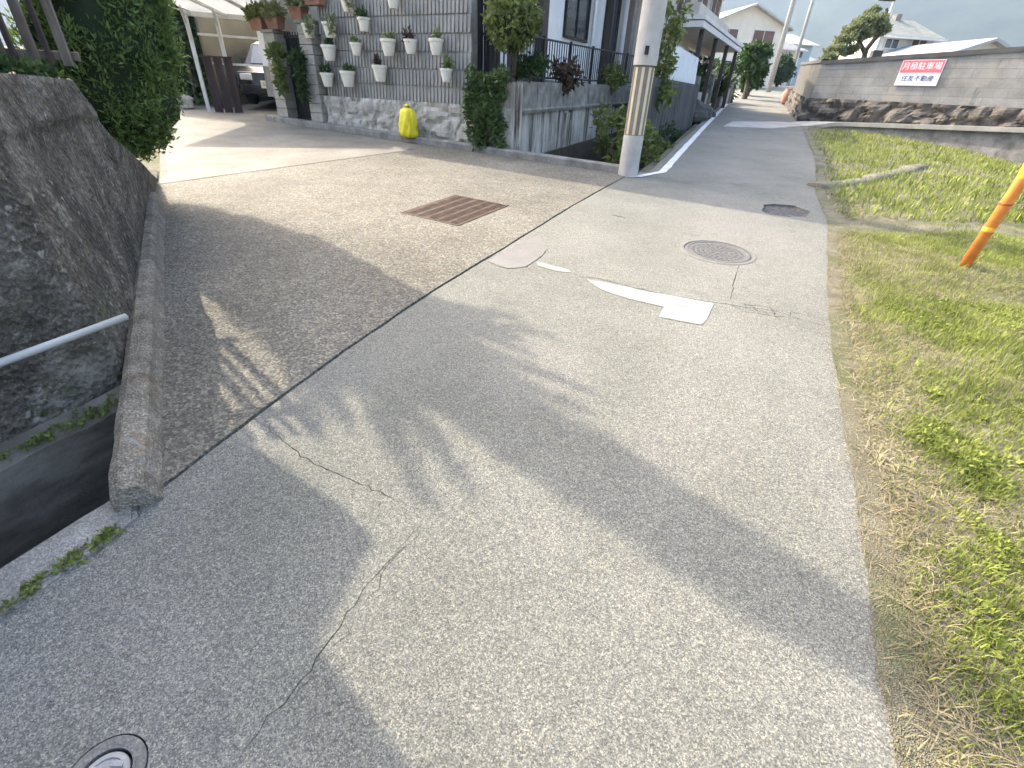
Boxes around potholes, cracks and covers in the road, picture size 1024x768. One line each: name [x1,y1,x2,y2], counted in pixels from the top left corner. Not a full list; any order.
manhole cover [679,240,757,265]
manhole cover [73,735,149,768]
drain grate [400,194,509,226]
